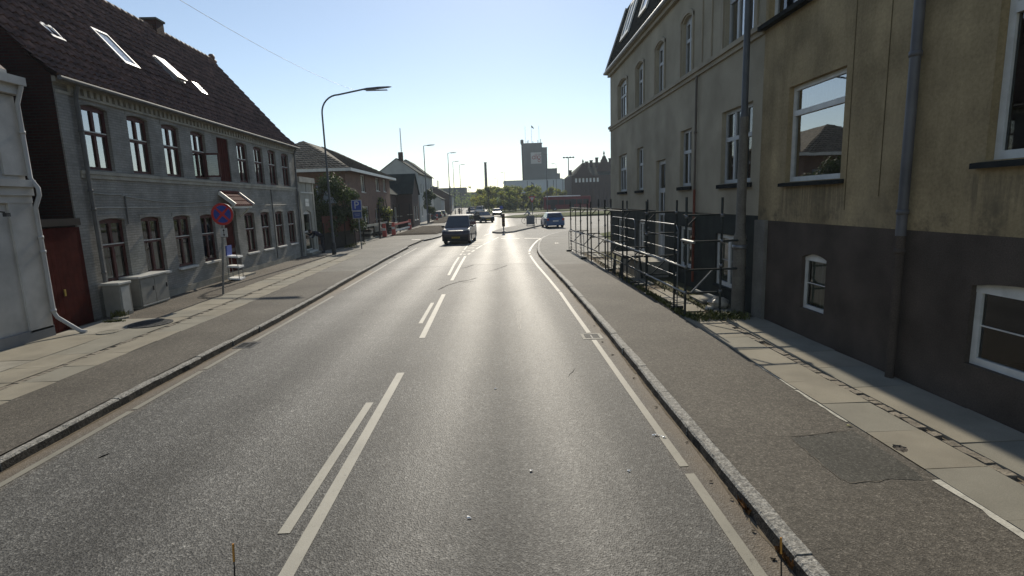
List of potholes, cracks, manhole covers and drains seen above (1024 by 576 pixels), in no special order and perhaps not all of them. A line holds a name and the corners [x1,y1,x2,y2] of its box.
manhole cover [127,319,174,328]
